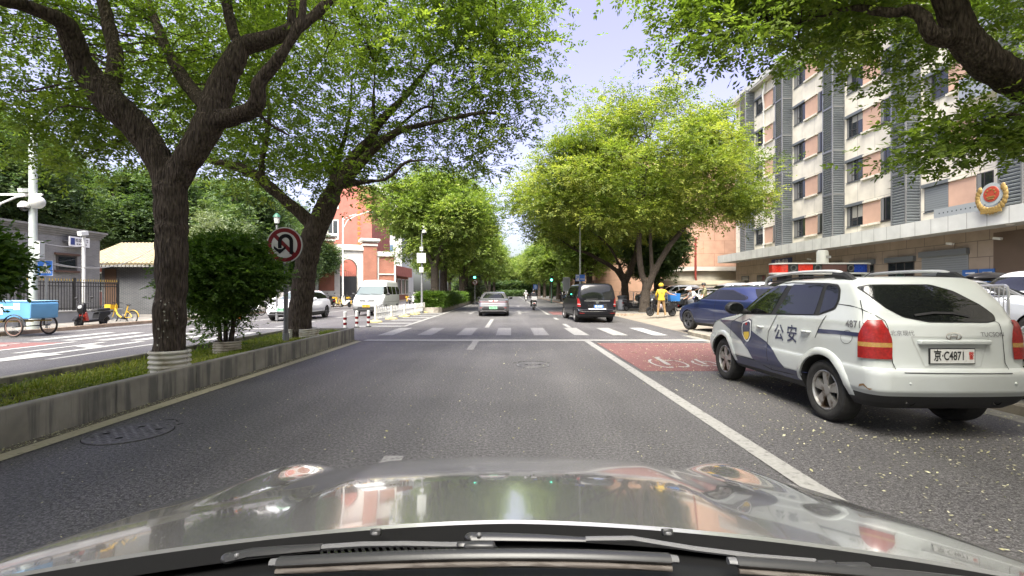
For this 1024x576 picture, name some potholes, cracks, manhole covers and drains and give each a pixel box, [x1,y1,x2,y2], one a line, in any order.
manhole cover [80,423,175,445]
